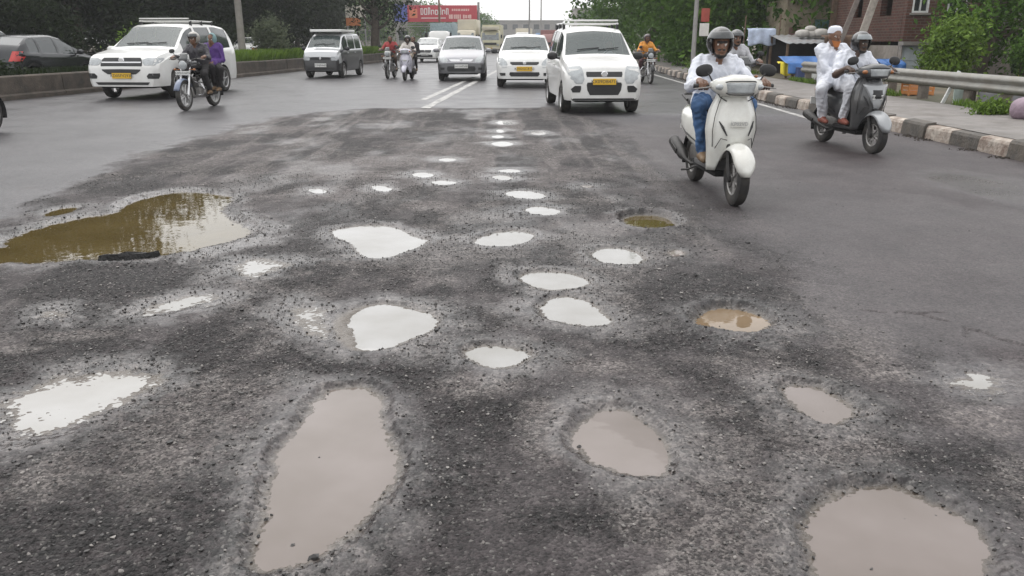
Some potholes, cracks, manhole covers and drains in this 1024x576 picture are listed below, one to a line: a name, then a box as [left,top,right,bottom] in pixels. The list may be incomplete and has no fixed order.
pothole [319,221,438,260]
pothole [766,374,878,428]
pothole [0,356,196,454]
pothole [778,468,1021,576]
pothole [497,188,554,200]
pothole [581,243,656,266]
pothole [220,375,420,576]
pothole [327,297,453,353]
pothole [116,287,242,320]
pothole [511,266,602,293]
